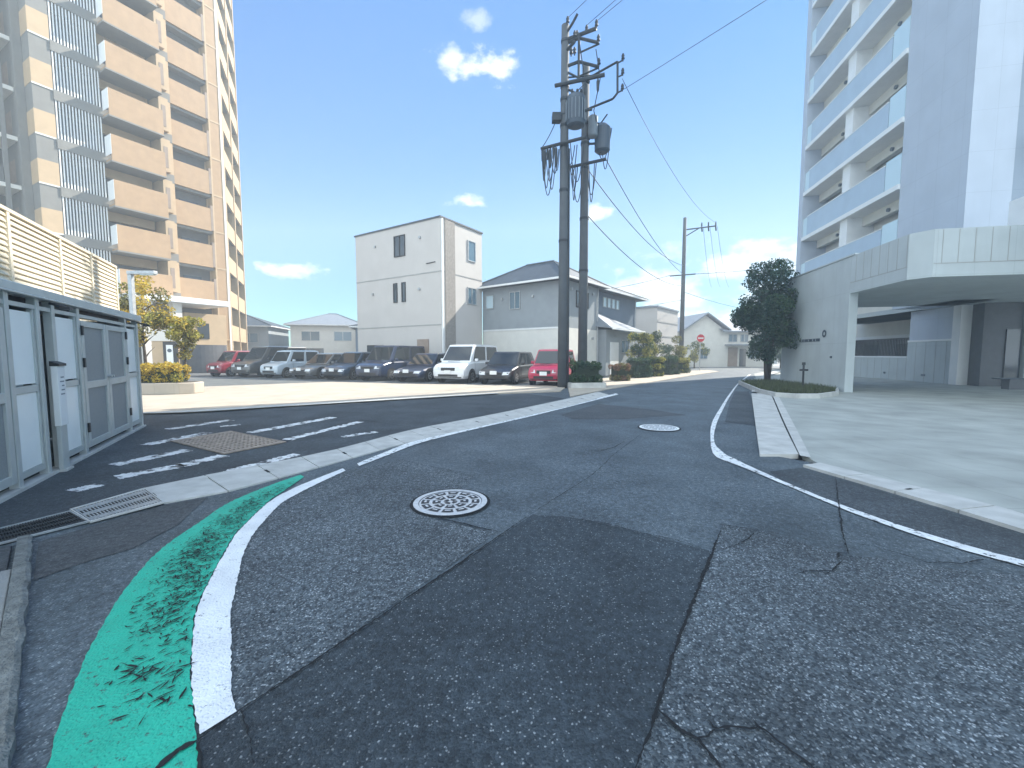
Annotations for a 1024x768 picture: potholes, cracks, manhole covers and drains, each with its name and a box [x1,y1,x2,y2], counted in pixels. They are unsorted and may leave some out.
drain grate [70,488,165,523]
manhole cover [638,424,681,432]
manhole cover [410,489,490,517]
drain grate [0,510,89,545]
crack [794,476,1001,576]
crack [658,709,814,768]
